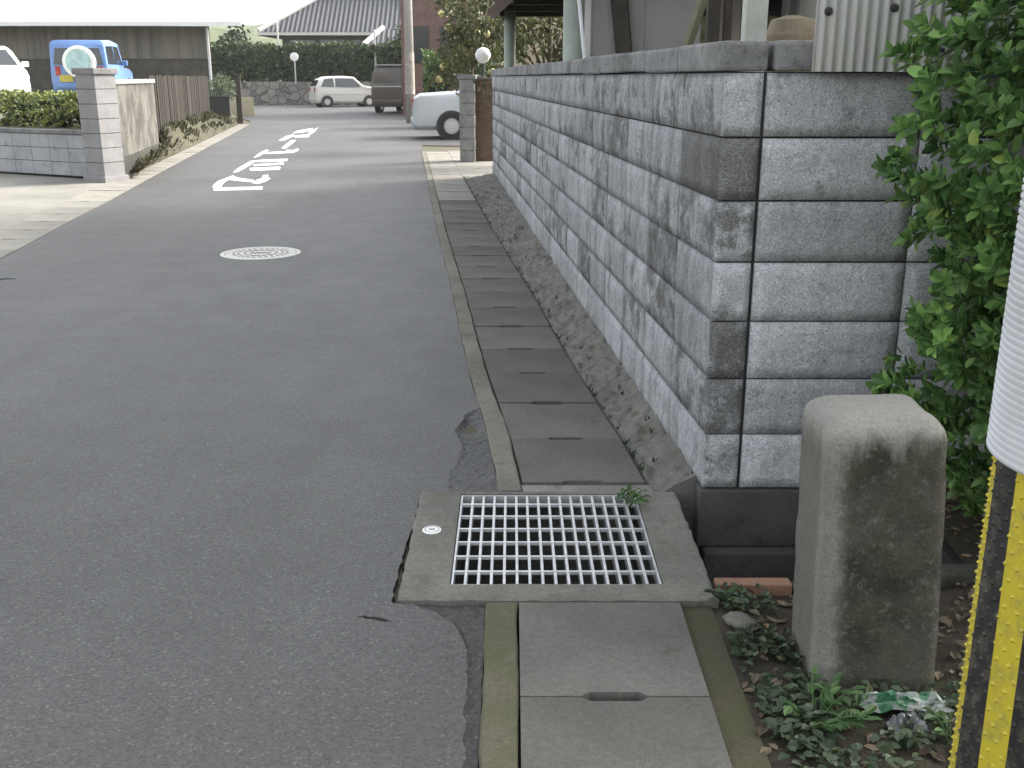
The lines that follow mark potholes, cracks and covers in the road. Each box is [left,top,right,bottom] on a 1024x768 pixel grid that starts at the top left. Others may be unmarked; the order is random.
crack [358,532,485,768]
drain grate [451,495,662,585]
manhole cover [220,247,301,260]
